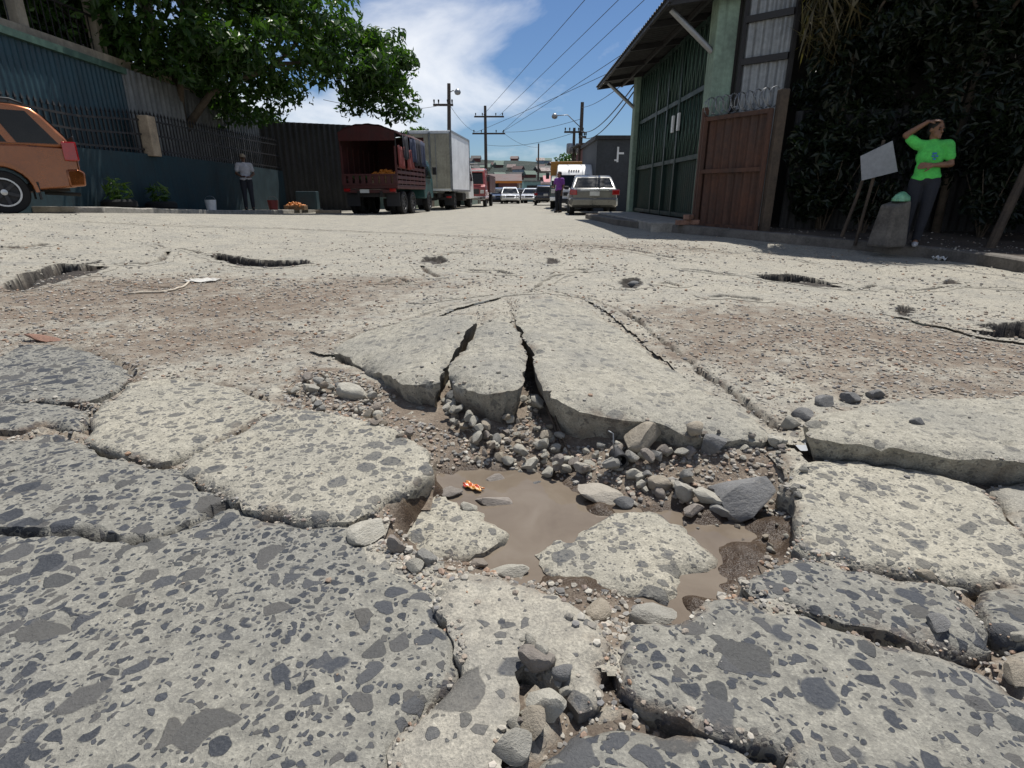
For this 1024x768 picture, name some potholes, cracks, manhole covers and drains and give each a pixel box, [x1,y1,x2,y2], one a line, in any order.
pothole [0,259,119,292]
crack [501,676,769,768]
crack [758,563,1003,658]
pothole [264,364,850,676]
pothole [607,275,654,290]
pothole [946,318,1024,343]
pothole [195,252,320,269]
crack [311,242,1005,517]
pothole [409,255,456,266]
pothole [737,272,862,291]
